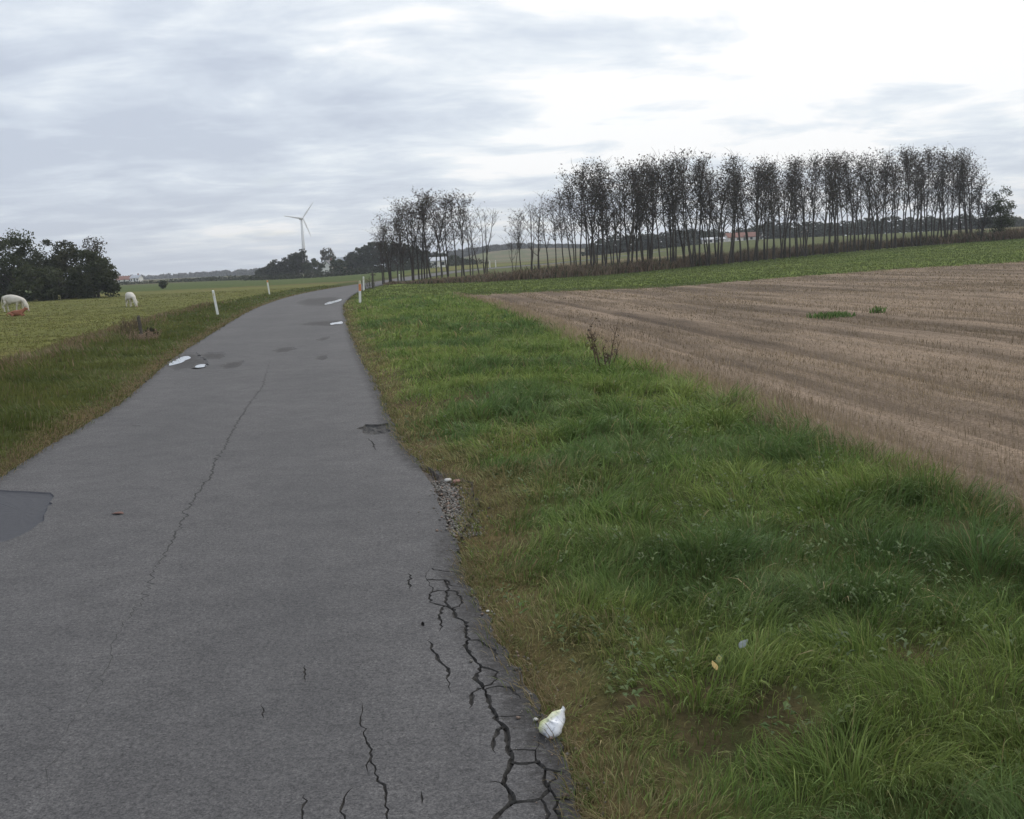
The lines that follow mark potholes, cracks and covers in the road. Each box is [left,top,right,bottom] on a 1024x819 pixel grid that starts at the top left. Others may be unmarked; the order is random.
pothole [419,466,480,540]
crack [339,697,389,819]
pothole [357,423,390,435]
crack [407,568,571,819]
